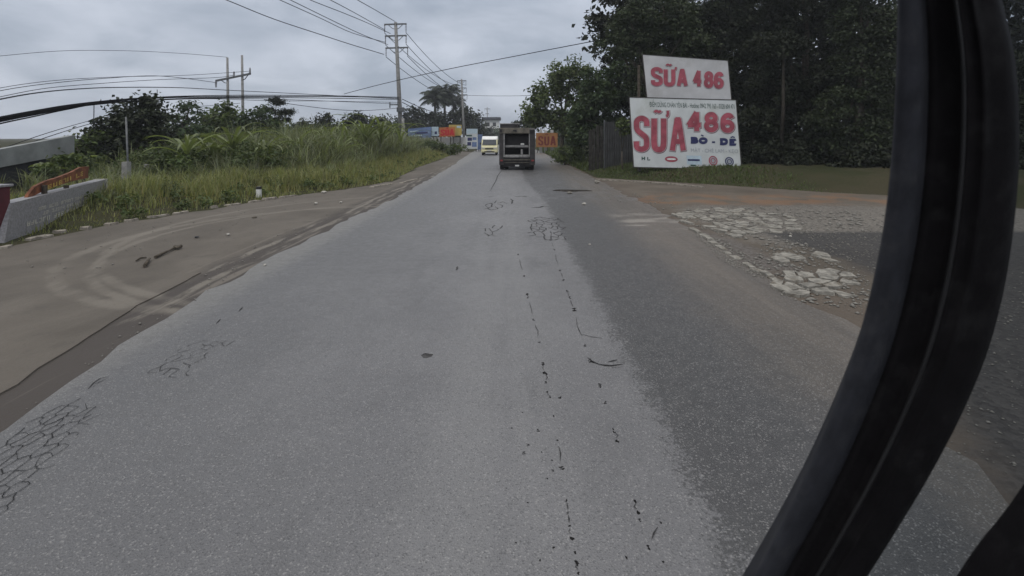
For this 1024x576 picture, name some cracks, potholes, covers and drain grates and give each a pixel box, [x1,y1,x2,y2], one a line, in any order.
crack [147,340,230,377]
crack [485,199,566,240]
crack [0,398,104,514]
